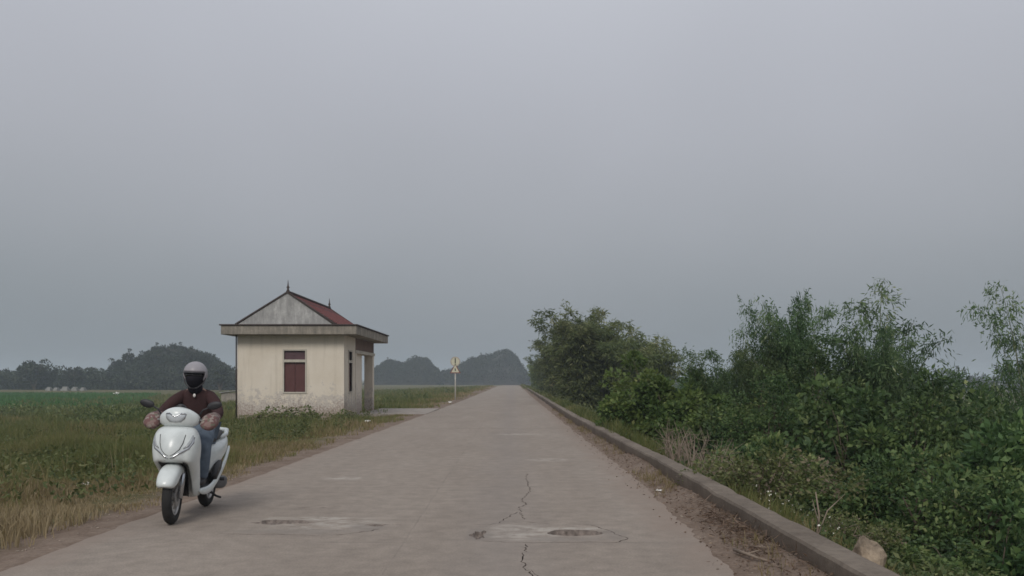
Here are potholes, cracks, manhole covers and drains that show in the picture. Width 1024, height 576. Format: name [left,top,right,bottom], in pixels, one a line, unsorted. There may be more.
crack [484,474,637,576]
